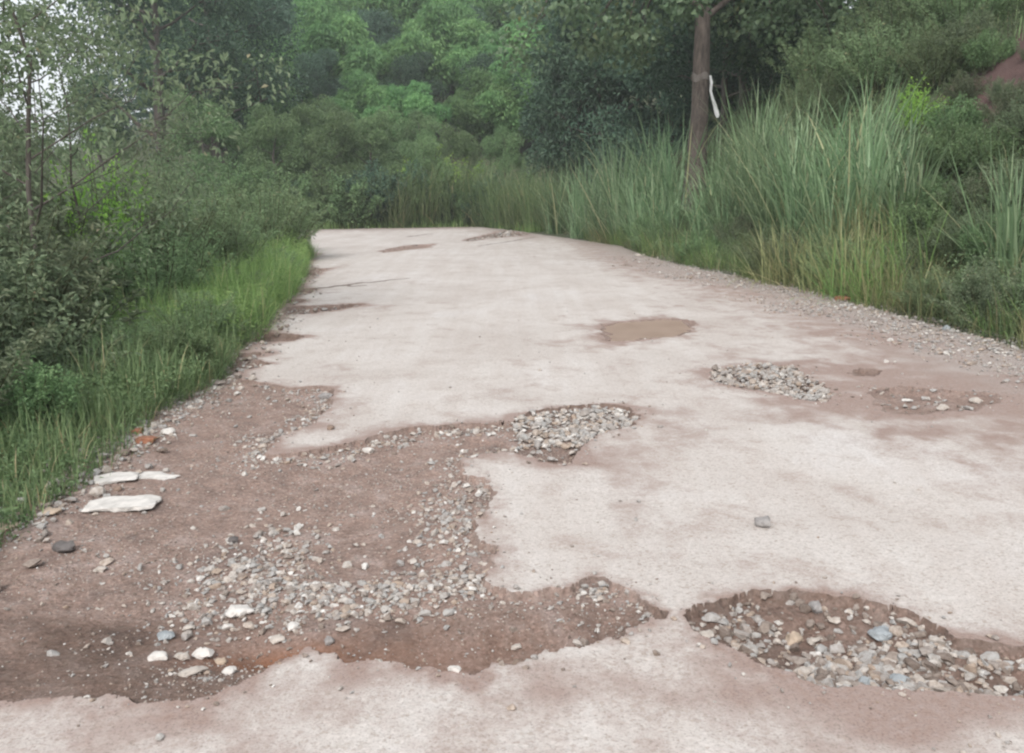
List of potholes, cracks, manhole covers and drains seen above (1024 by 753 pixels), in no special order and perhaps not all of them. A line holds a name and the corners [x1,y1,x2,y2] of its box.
crack [317,278,408,289]
pothole [867,385,1001,416]
pothole [710,365,834,402]
pothole [0,374,669,704]
pothole [847,368,882,377]
pothole [599,318,697,342]
pothole [380,244,434,253]
pothole [683,588,1024,696]
pothole [279,304,366,315]
